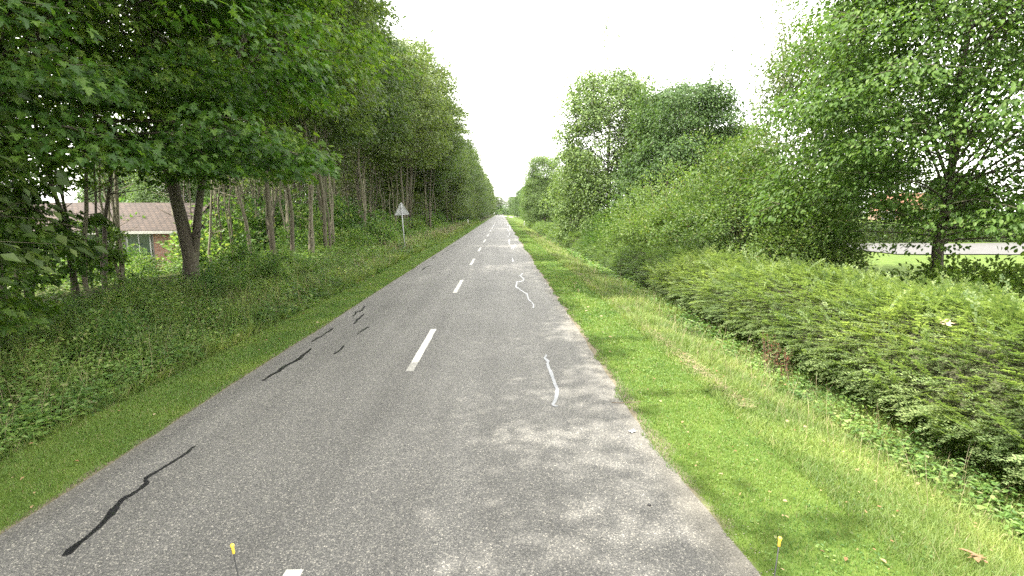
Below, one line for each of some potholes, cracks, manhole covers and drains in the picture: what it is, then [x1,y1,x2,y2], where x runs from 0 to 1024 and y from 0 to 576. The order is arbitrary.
crack [507,224,534,308]
crack [334,306,368,354]
